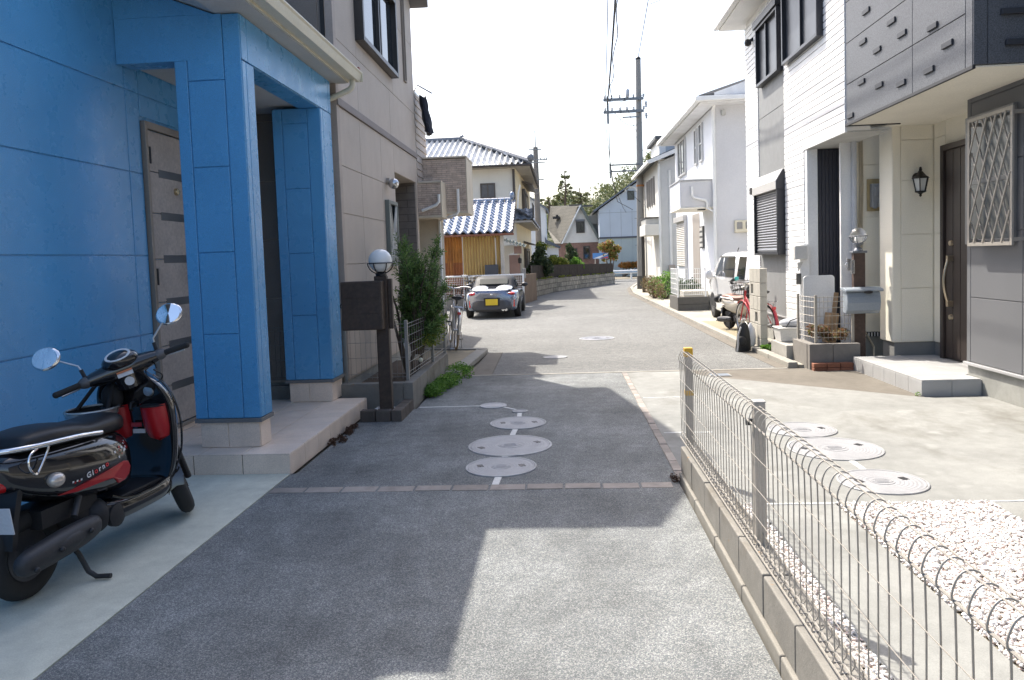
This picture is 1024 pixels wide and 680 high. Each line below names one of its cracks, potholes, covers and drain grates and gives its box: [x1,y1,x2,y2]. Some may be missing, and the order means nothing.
manhole cover [468,435,552,457]
manhole cover [466,457,537,477]
manhole cover [836,469,931,495]
manhole cover [490,416,546,430]
manhole cover [787,437,885,461]
manhole cover [767,422,838,438]
